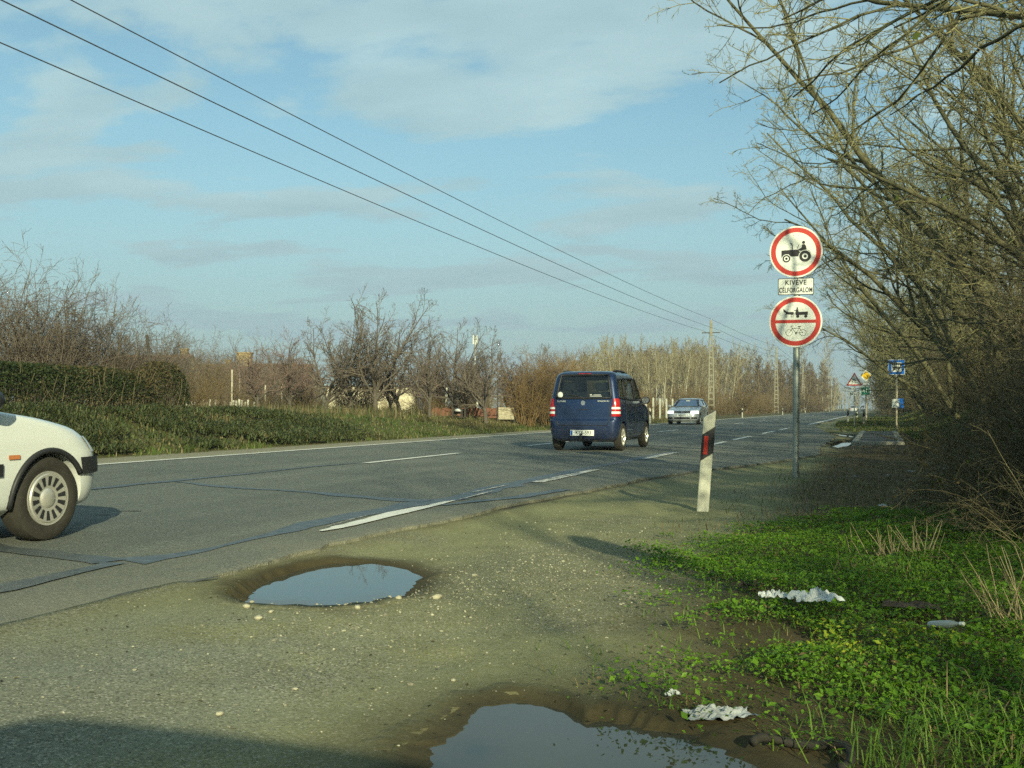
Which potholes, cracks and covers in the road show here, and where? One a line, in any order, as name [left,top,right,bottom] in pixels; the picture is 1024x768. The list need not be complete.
pothole [204,555,452,611]
pothole [350,682,827,768]
